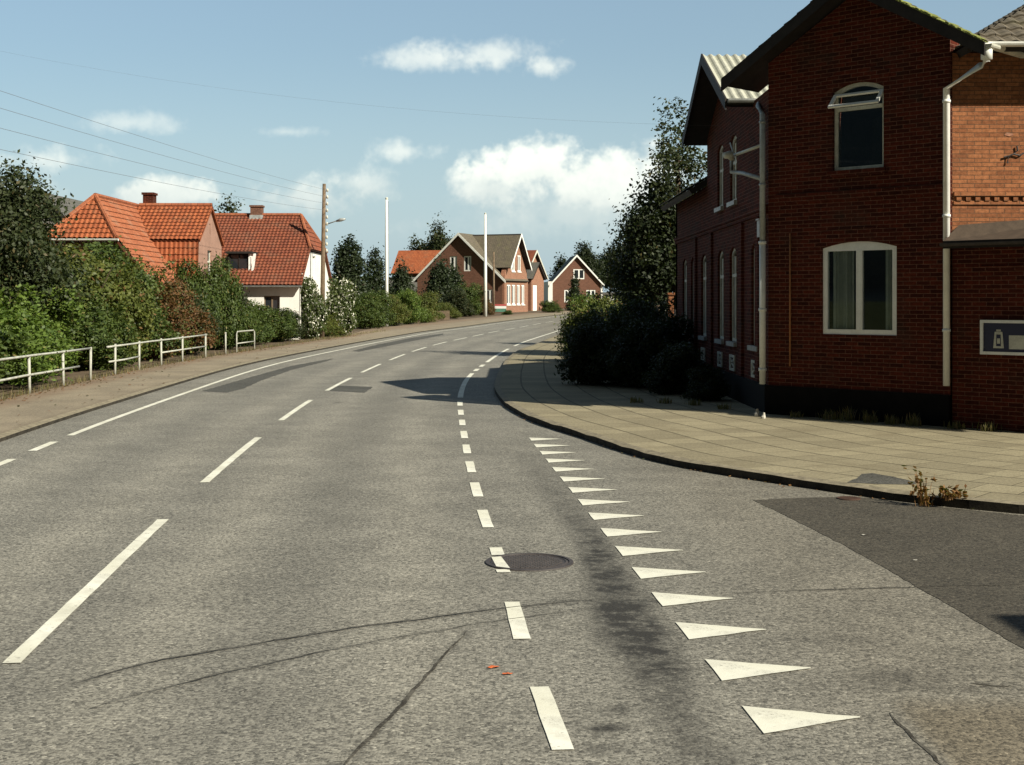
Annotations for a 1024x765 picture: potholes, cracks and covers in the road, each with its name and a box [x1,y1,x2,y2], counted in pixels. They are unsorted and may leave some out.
crack [79,599,594,765]
manhole cover [485,553,574,571]
crack [890,713,943,765]
